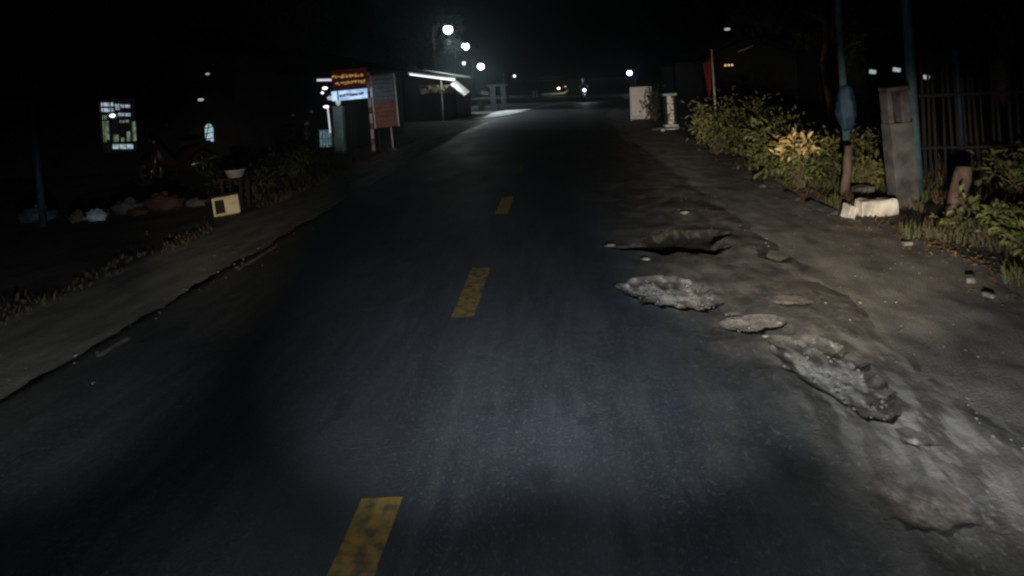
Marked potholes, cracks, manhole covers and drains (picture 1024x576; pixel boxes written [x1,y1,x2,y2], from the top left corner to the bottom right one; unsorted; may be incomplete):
pothole [606,229,732,256]
pothole [766,333,903,425]
pothole [870,471,985,537]
